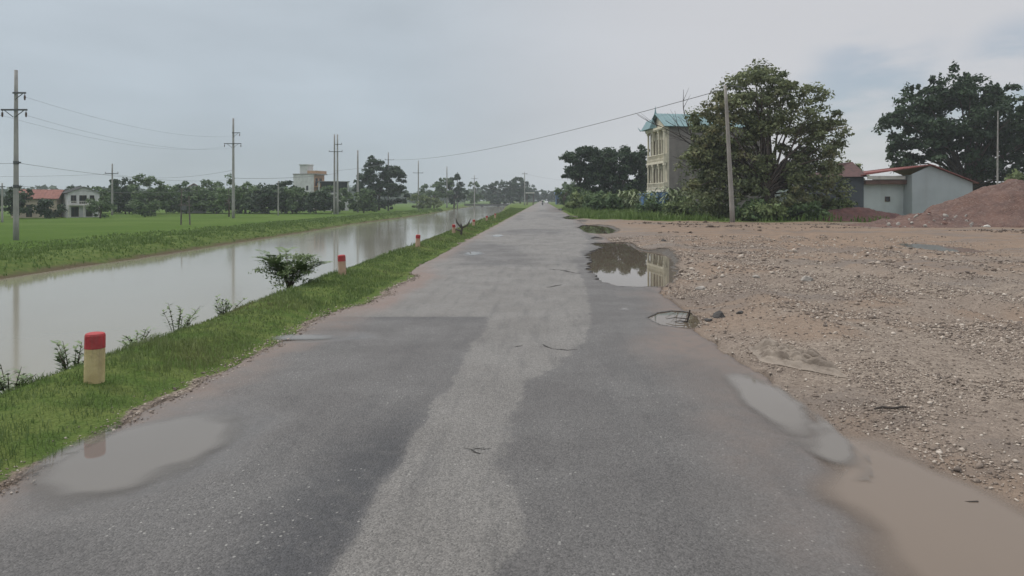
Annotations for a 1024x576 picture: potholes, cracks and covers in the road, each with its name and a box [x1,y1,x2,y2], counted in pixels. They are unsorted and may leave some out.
pothole [646,310,703,331]
pothole [583,242,683,289]
